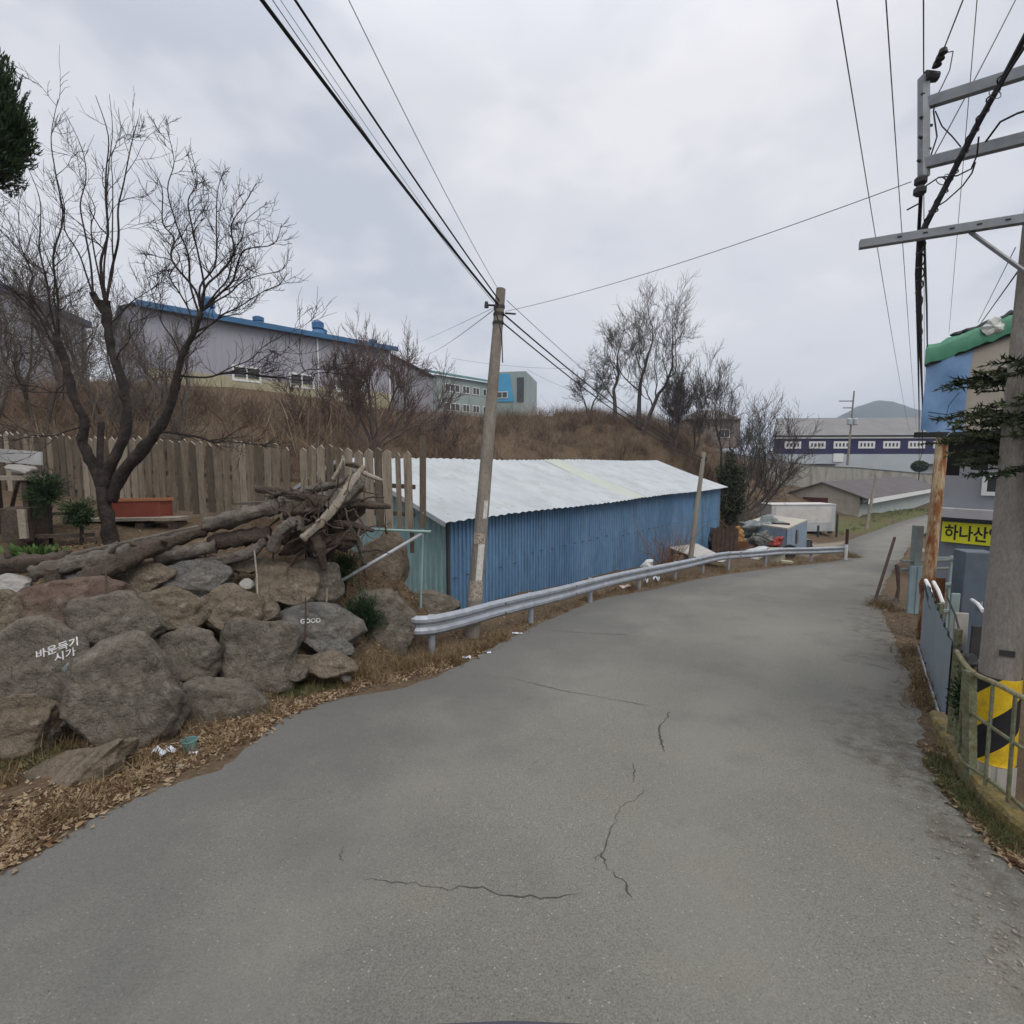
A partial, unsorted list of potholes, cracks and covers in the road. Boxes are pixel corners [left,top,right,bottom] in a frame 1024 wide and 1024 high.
crack [362,878,582,899]
crack [658,711,670,751]
crack [594,762,644,897]
